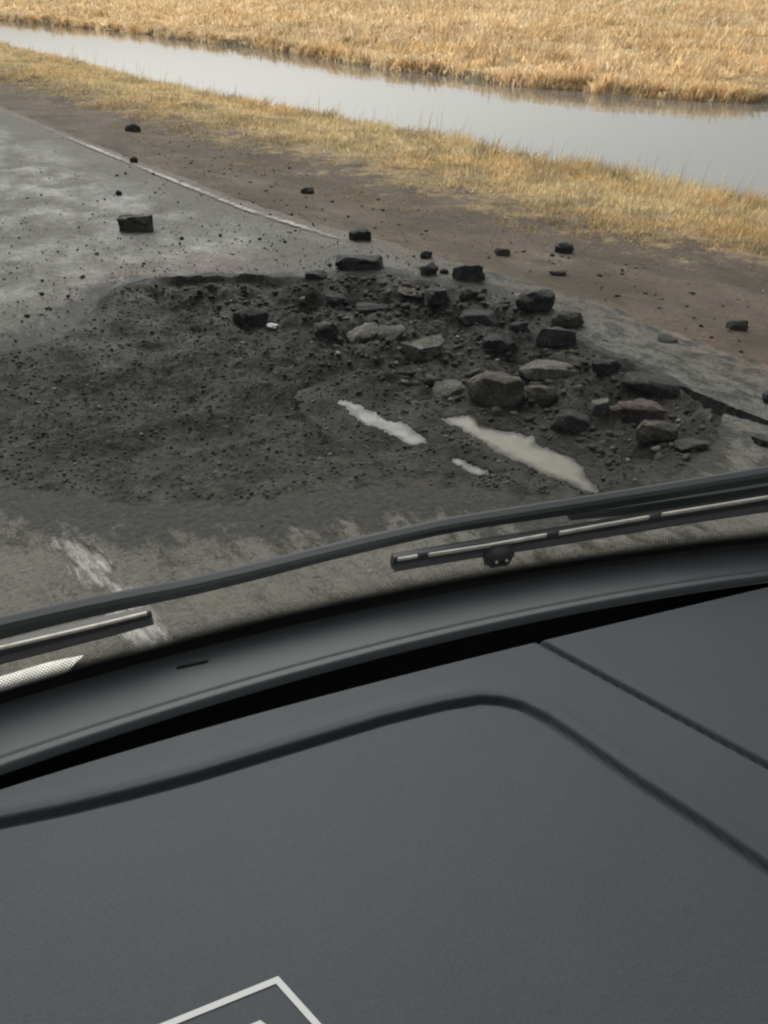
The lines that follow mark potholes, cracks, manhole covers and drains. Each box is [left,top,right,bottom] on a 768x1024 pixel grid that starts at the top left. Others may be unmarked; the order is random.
pothole [0,272,719,507]
crack [680,385,768,449]
